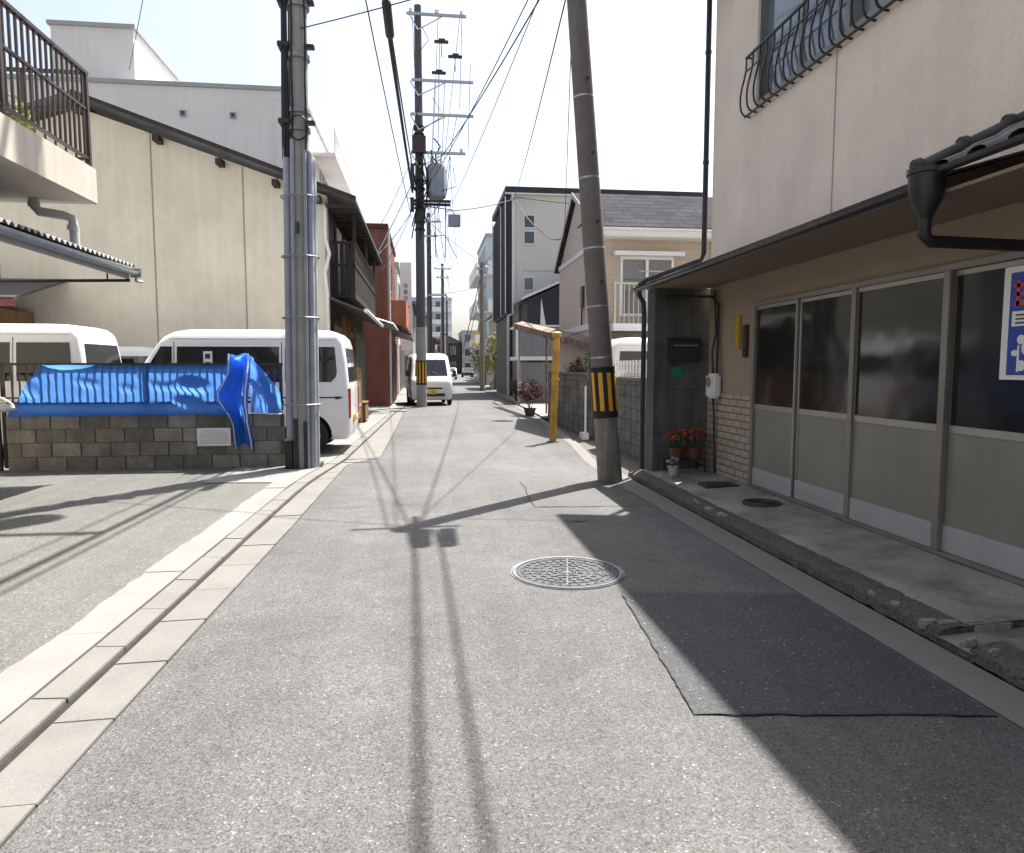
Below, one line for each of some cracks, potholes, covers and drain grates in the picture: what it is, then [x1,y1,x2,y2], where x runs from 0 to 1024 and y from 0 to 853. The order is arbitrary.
manhole cover [510,556,625,590]
manhole cover [742,498,783,507]
